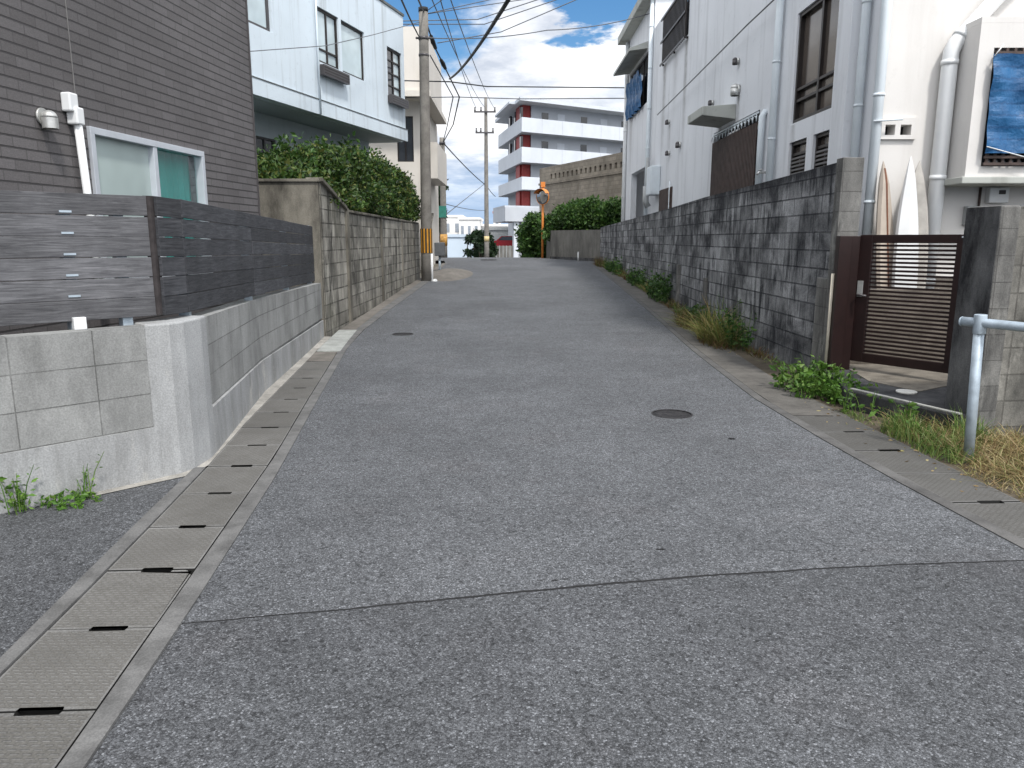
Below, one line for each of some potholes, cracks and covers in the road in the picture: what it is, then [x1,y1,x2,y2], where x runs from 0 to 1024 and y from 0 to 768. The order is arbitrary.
manhole cover [651,409,693,419]
